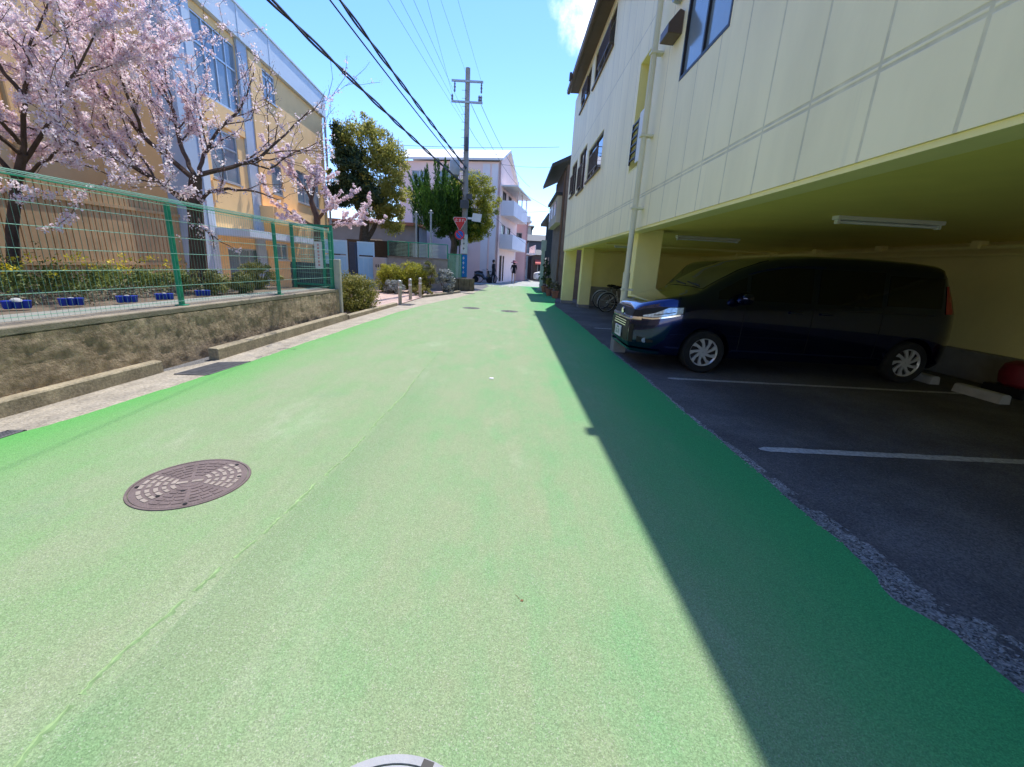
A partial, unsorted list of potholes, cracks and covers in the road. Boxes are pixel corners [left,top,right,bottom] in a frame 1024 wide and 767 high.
manhole cover [123,459,251,511]
drain grate [0,430,27,439]
drain grate [174,361,251,375]
manhole cover [351,754,443,767]
